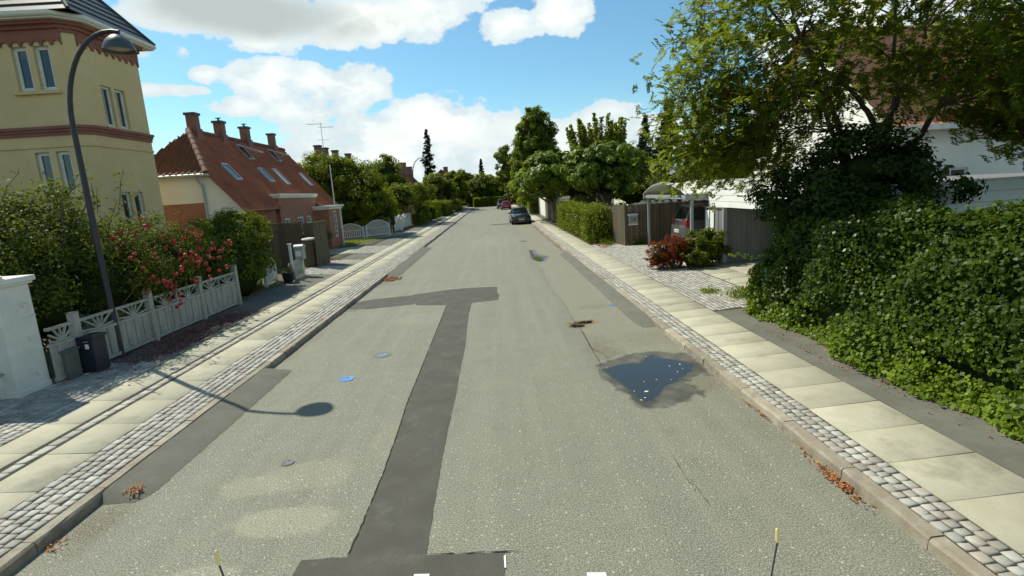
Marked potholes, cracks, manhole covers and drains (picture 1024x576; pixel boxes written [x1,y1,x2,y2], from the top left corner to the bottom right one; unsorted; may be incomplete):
pothole [527,250,550,262]
pothole [565,319,599,328]
